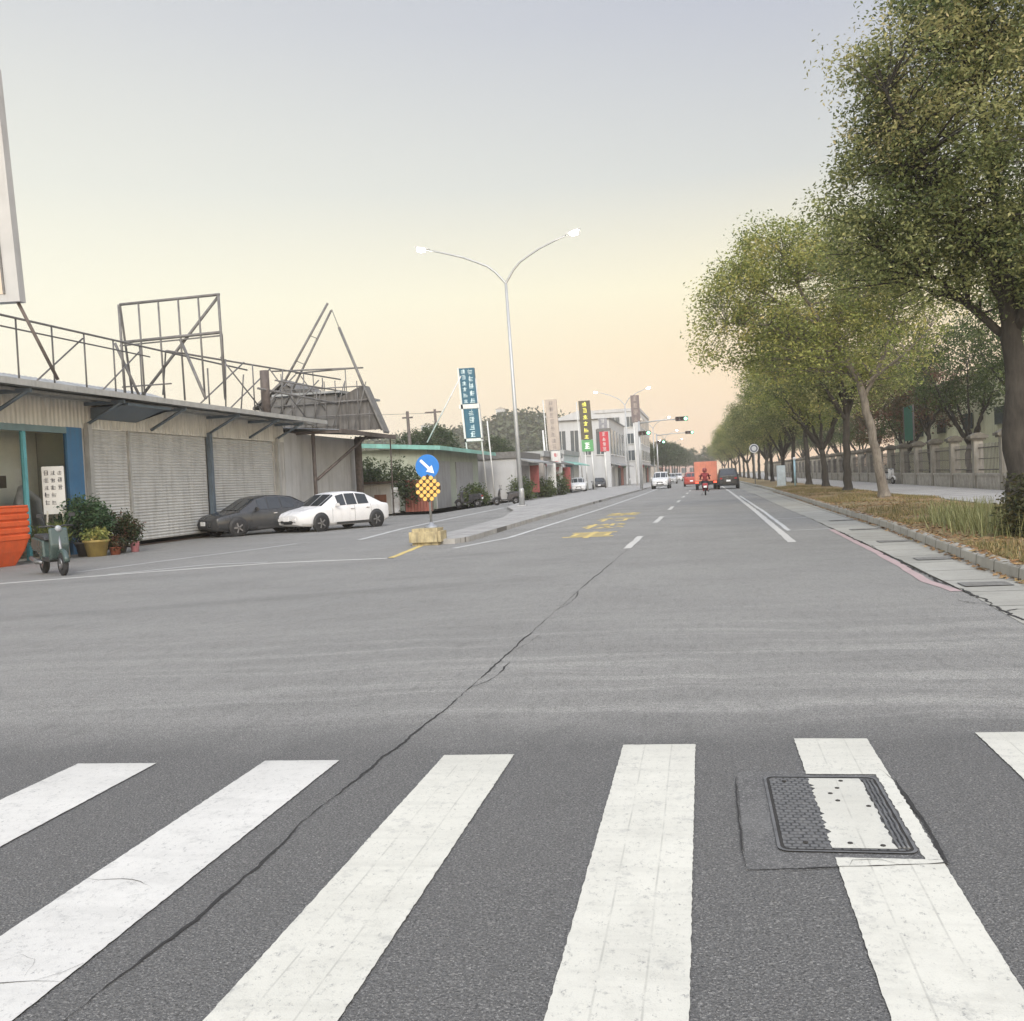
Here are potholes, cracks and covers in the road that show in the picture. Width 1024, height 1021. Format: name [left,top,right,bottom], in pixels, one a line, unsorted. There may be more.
crack [64,553,623,1021]
manhole cover [764,776,918,854]
